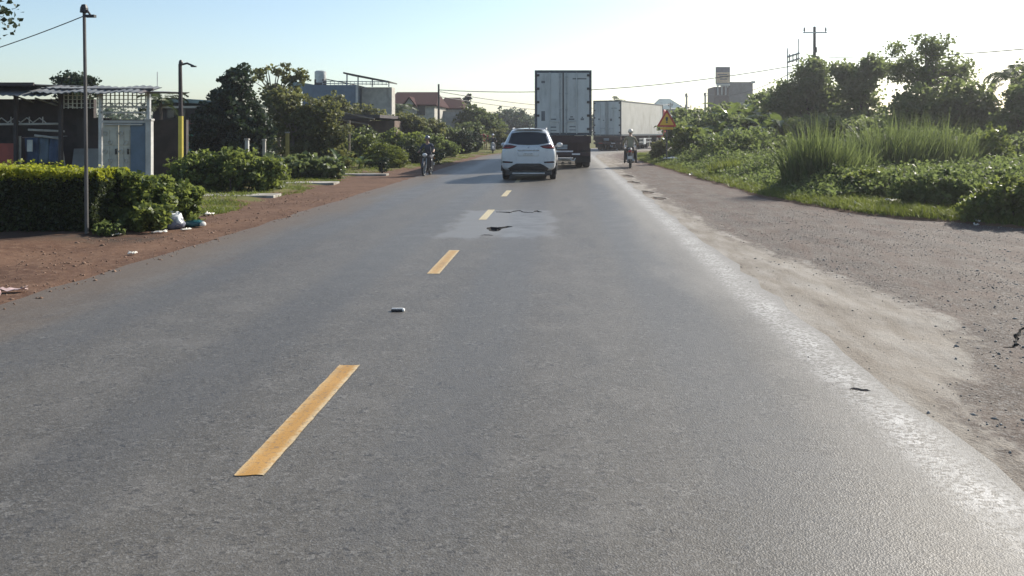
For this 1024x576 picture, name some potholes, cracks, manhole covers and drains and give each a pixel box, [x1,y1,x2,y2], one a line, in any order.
crack [1003,327,1024,348]
